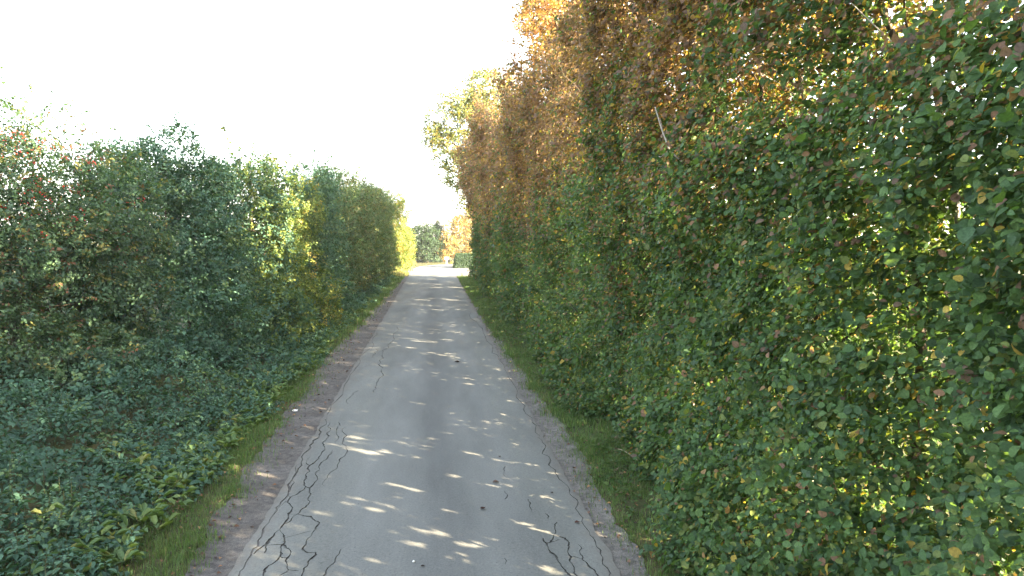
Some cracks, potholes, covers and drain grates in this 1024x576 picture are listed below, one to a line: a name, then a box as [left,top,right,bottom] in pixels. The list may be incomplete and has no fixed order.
crack [528,499,599,576]
crack [239,419,348,576]
